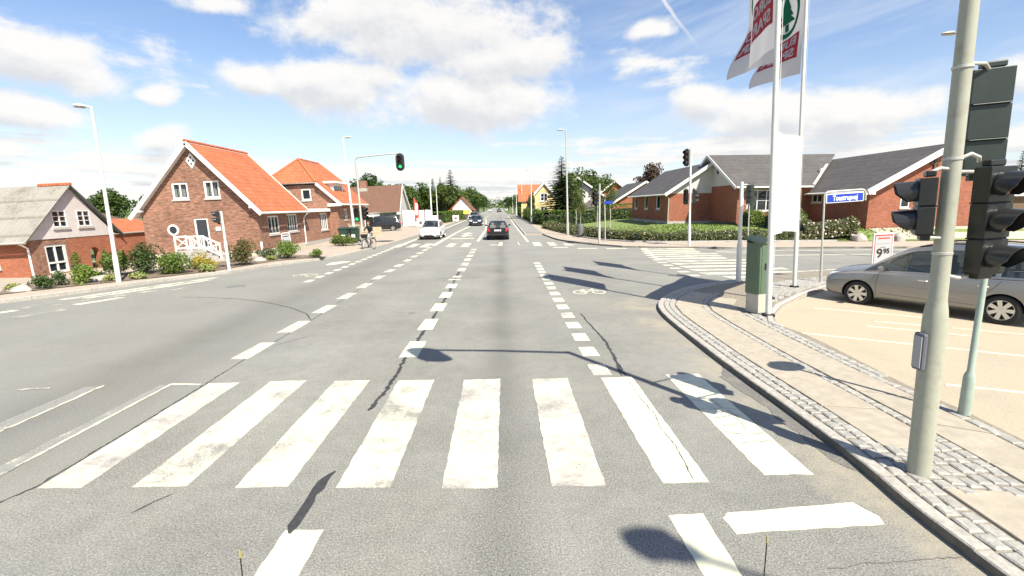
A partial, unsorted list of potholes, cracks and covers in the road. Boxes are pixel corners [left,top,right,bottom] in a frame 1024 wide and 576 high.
crack [827,556,961,569]
crack [625,378,694,480]
